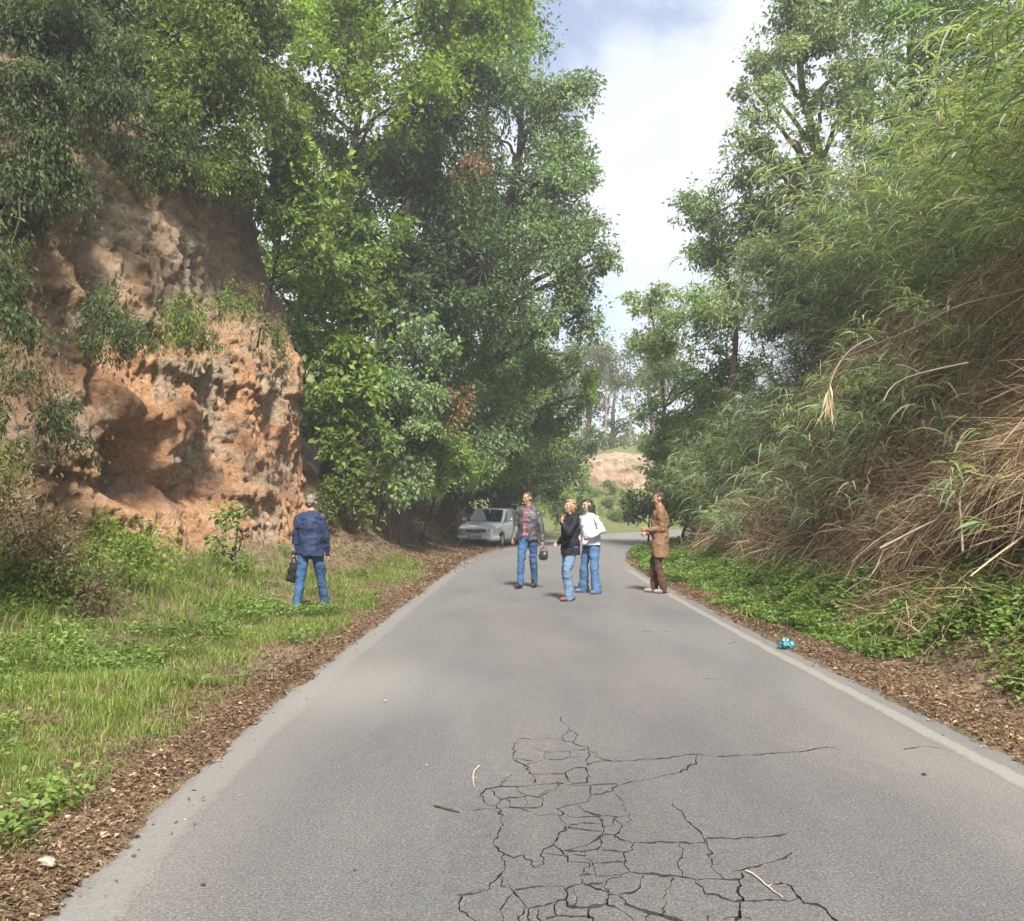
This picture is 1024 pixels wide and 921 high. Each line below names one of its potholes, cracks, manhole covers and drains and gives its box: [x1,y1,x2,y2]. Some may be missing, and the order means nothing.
crack [458,717,847,921]
